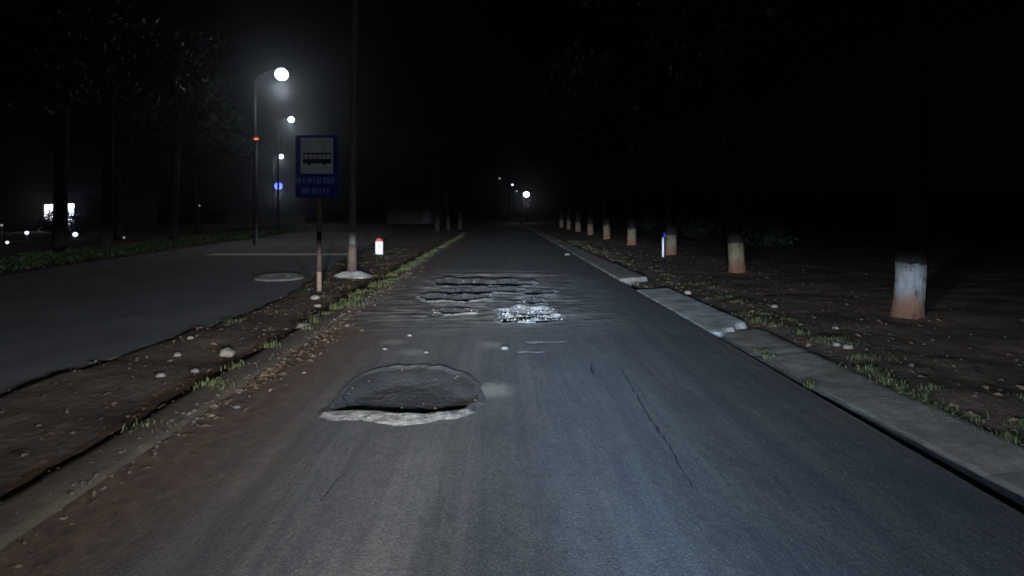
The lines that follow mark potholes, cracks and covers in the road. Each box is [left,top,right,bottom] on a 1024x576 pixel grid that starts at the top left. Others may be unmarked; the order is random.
crack [622,369,693,487]
pothole [491,304,568,326]
manhole cover [253,273,304,281]
pothole [429,277,541,288]
pothole [317,364,487,426]
pothole [416,293,496,303]
